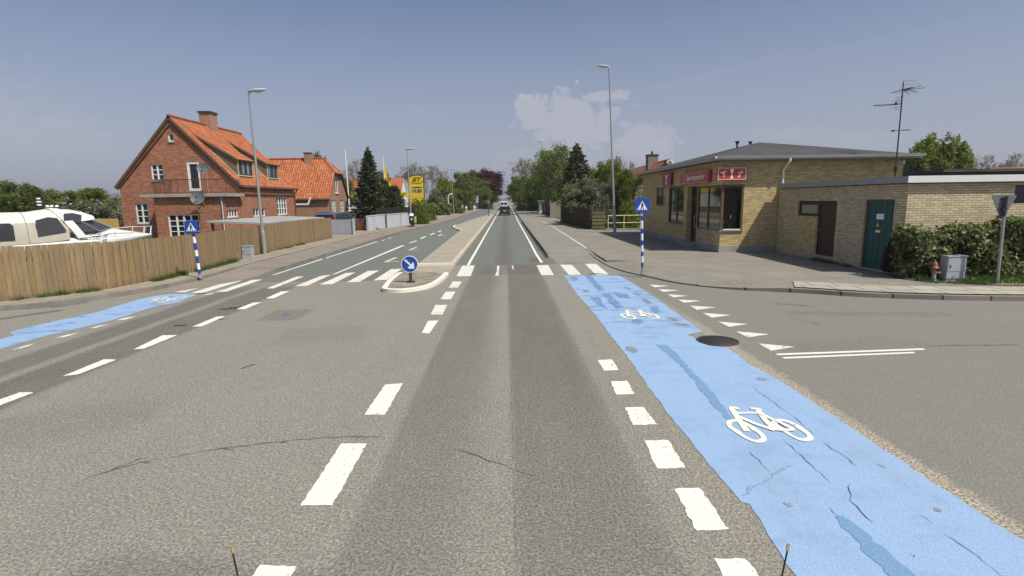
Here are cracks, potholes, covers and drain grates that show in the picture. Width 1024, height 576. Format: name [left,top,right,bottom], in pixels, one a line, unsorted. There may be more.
crack [76,436,537,484]
manhole cover [696,335,739,346]
crack [722,388,1001,575]
